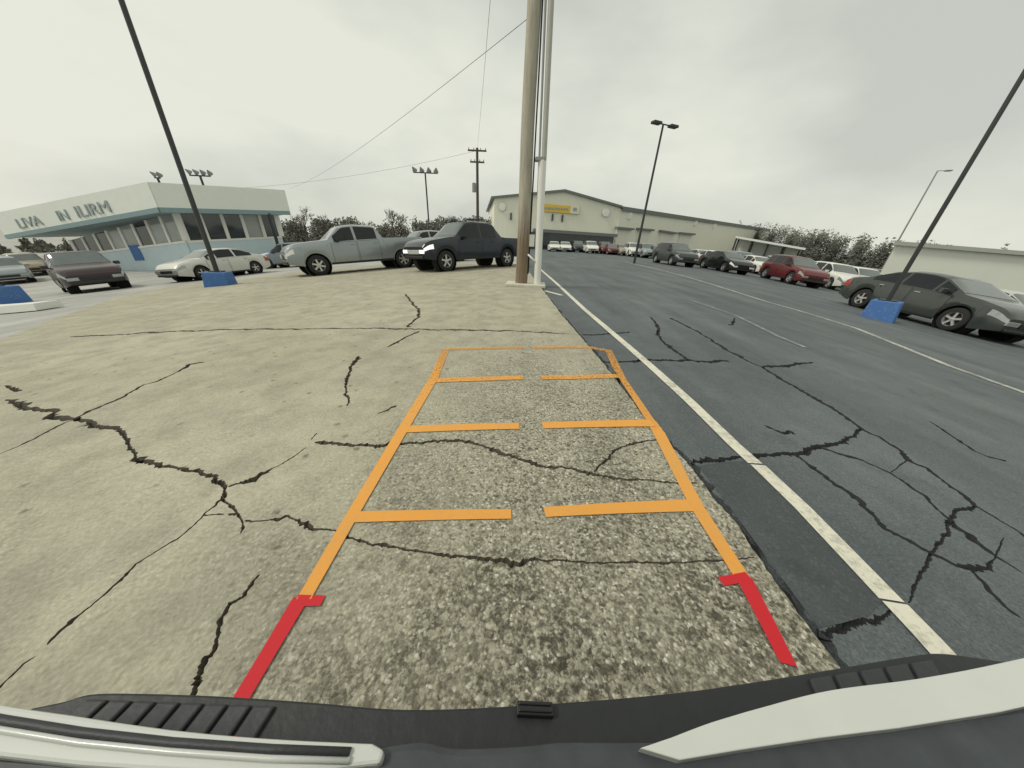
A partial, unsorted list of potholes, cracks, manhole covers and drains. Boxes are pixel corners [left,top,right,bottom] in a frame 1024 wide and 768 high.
crack [387,294,421,347]
crack [0,317,1024,695]
